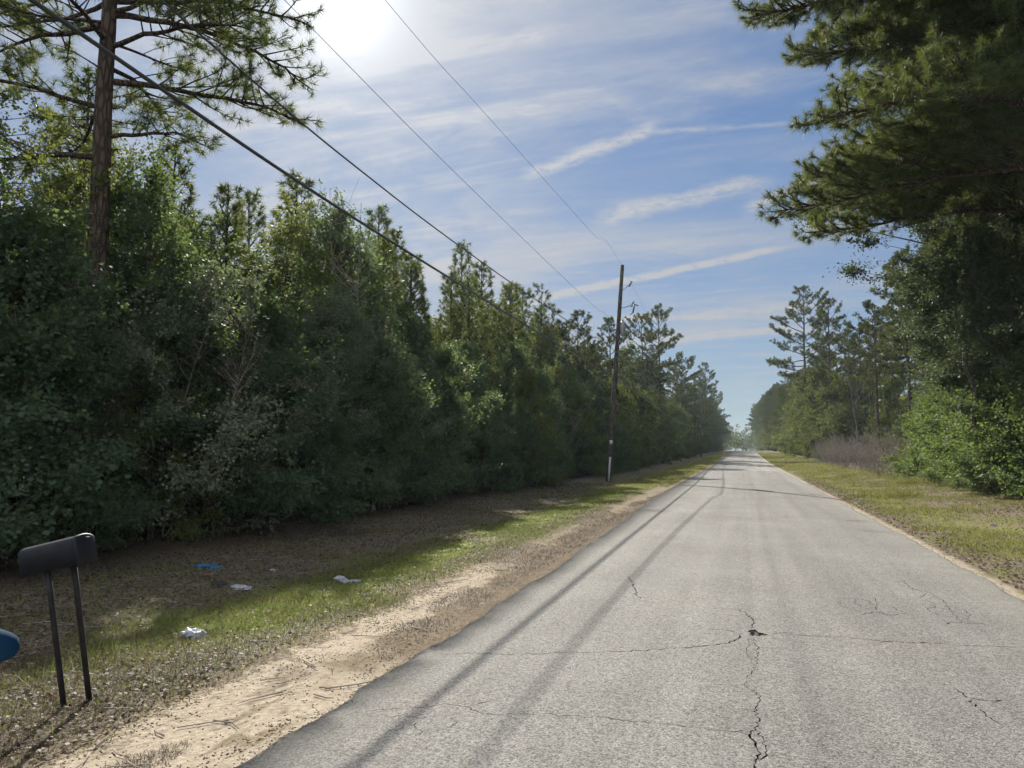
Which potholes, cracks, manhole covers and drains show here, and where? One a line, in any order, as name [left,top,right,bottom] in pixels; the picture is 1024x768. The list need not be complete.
crack [898,580,971,625]
crack [782,632,1002,649]
crack [955,688,1002,725]
crack [346,608,769,768]
